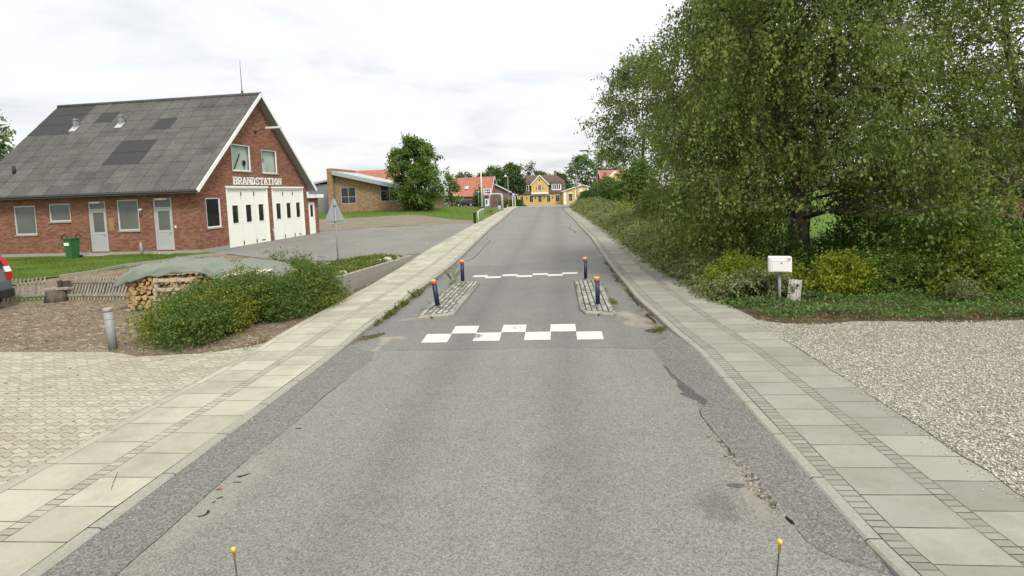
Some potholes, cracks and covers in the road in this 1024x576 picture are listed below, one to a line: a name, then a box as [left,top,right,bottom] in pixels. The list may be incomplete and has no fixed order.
crack [699,409,780,511]
